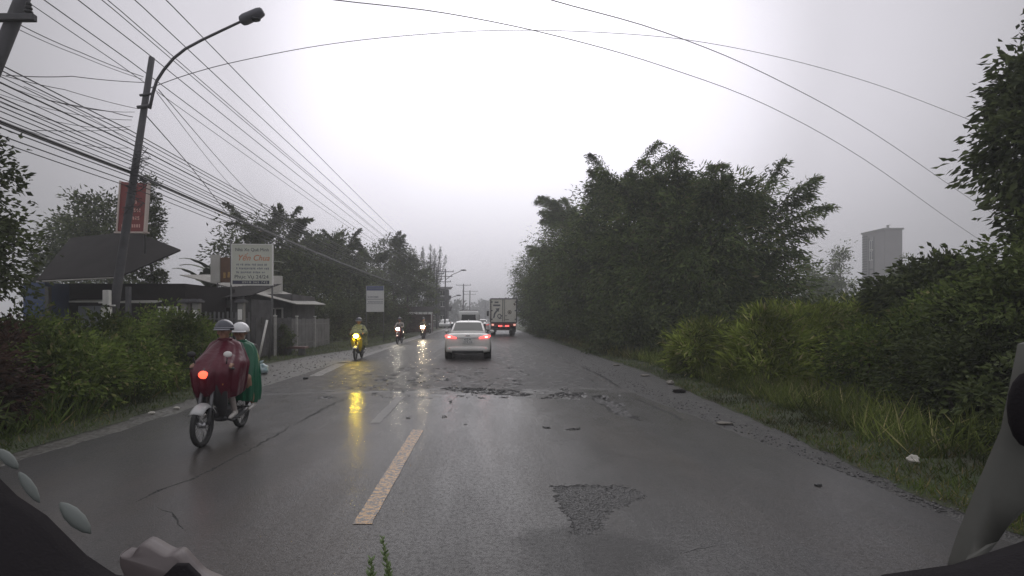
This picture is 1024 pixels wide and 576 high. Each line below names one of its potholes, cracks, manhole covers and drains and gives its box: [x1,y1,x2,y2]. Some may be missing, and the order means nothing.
pothole [591,395,643,421]
crack [137,397,352,531]
pothole [316,367,532,399]
pothole [540,388,587,400]
